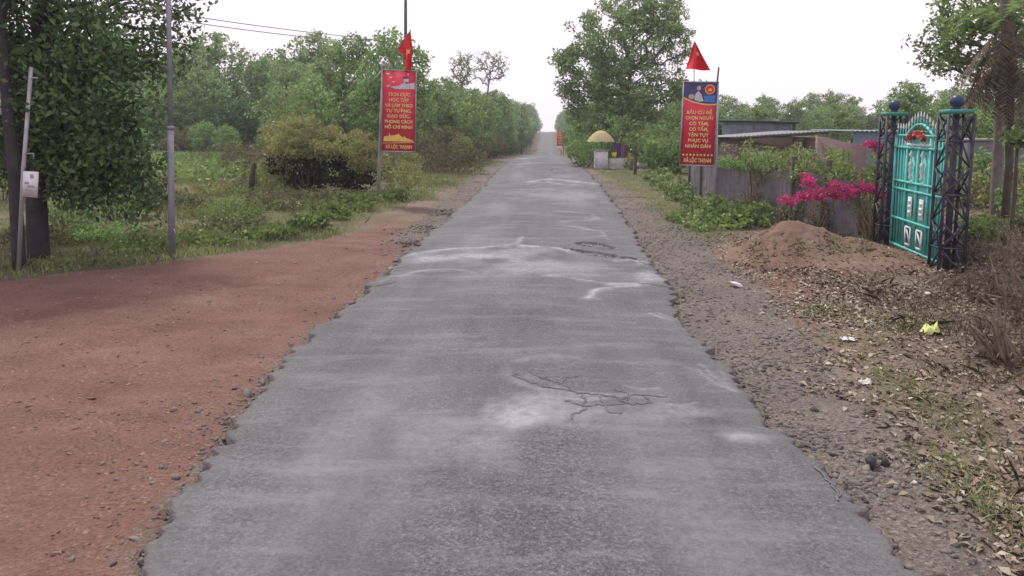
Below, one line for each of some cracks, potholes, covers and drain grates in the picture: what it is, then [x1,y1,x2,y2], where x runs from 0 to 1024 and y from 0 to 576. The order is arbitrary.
pothole [571,241,618,249]
crack [512,372,668,419]
pothole [560,247,642,261]
crack [813,465,844,501]
